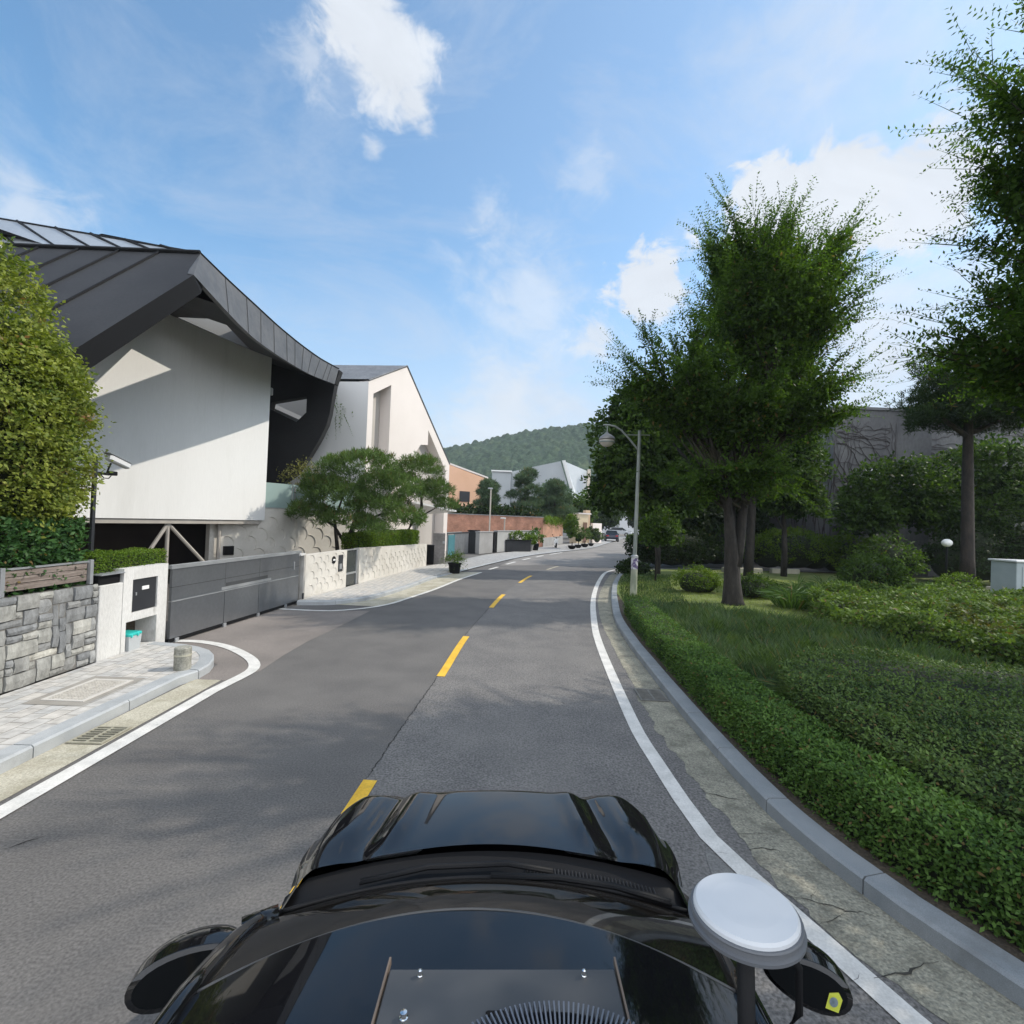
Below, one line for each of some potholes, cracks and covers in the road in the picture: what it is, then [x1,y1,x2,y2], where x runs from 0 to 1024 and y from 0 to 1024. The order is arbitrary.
manhole cover [23,676,145,706]
crack [852,961,939,981]
drain grate [634,688,670,702]
drain grate [65,726,132,744]
crack [791,891,874,924]
